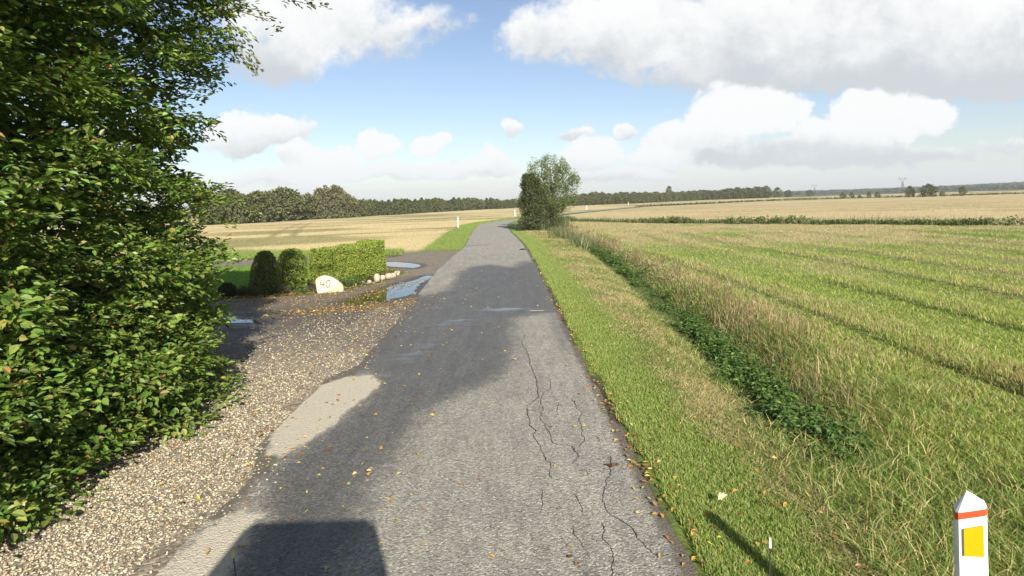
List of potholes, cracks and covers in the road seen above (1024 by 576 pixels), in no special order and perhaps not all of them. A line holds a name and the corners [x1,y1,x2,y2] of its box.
crack [521,335,656,576]
